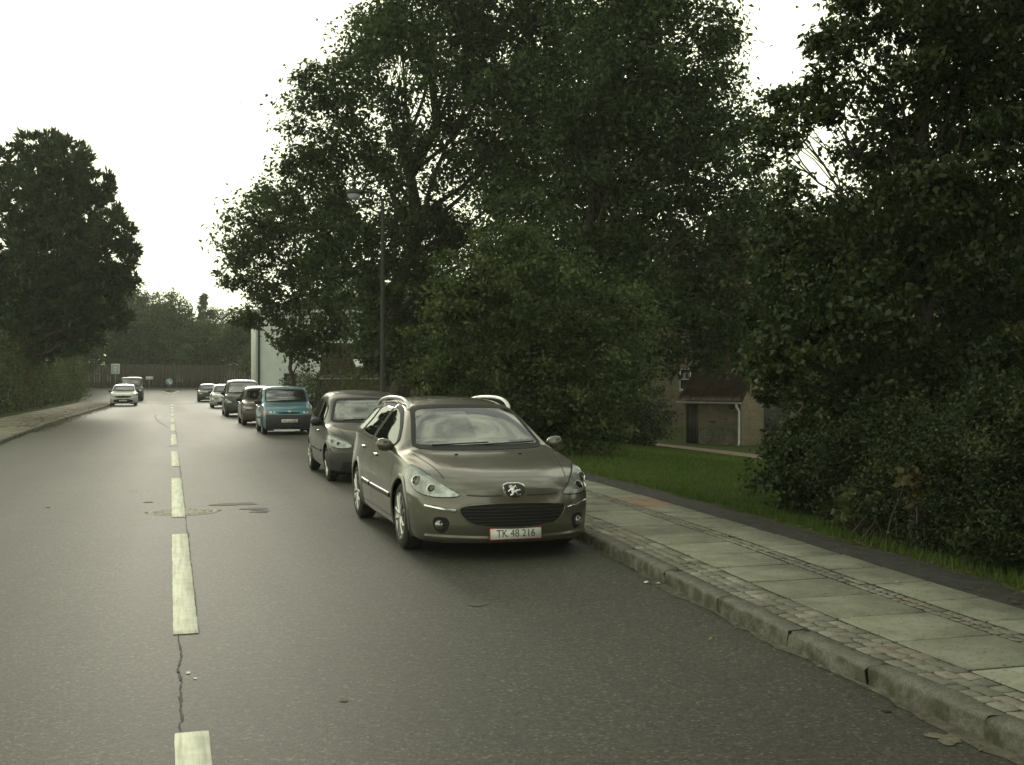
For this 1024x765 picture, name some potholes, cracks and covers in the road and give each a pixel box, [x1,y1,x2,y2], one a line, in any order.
crack [176,634,184,733]
manhole cover [145,508,221,516]
